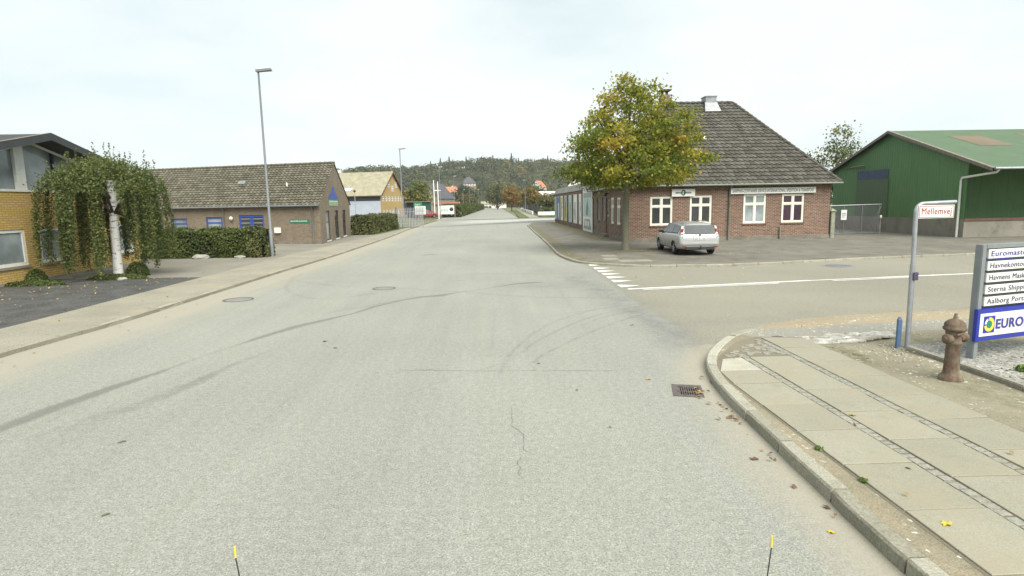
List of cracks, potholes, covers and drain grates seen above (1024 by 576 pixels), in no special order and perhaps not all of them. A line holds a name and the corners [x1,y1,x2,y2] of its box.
drain grate [671,384,705,398]
